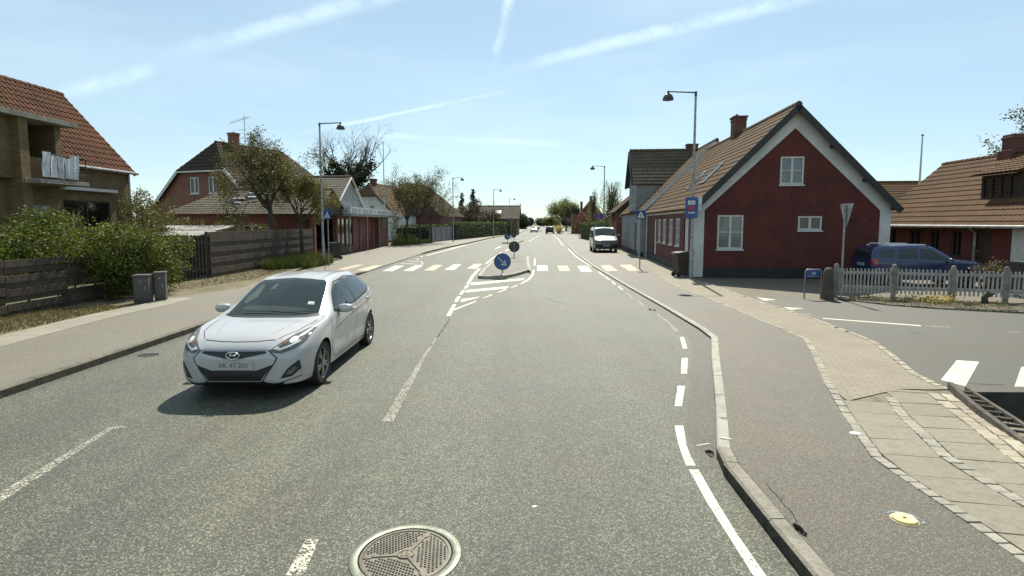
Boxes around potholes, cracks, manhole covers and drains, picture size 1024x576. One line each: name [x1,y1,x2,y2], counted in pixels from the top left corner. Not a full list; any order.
utility cover [886,511,925,527]
manhole cover [348,524,462,576]
